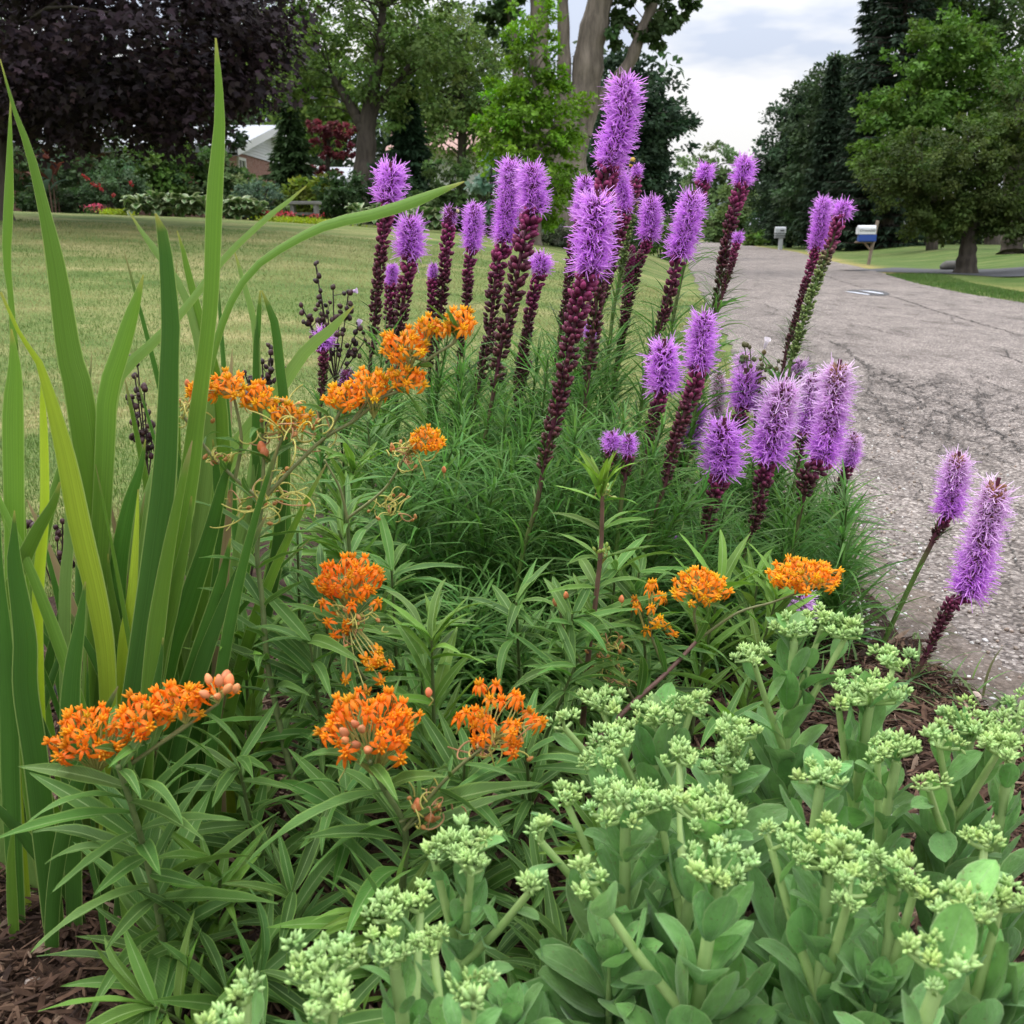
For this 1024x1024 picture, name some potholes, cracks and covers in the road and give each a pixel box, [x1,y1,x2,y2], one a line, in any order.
crack [722,317,1024,481]
crack [891,296,1023,363]
